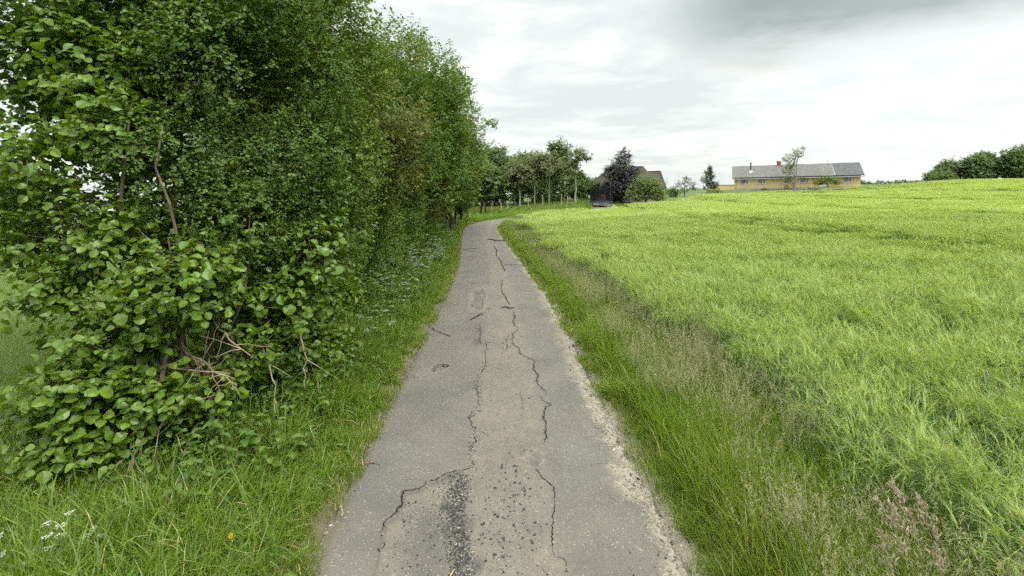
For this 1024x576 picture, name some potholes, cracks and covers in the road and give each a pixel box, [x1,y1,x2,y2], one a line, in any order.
crack [378,239,581,553]
crack [533,465,569,575]
pothole [429,363,450,373]
